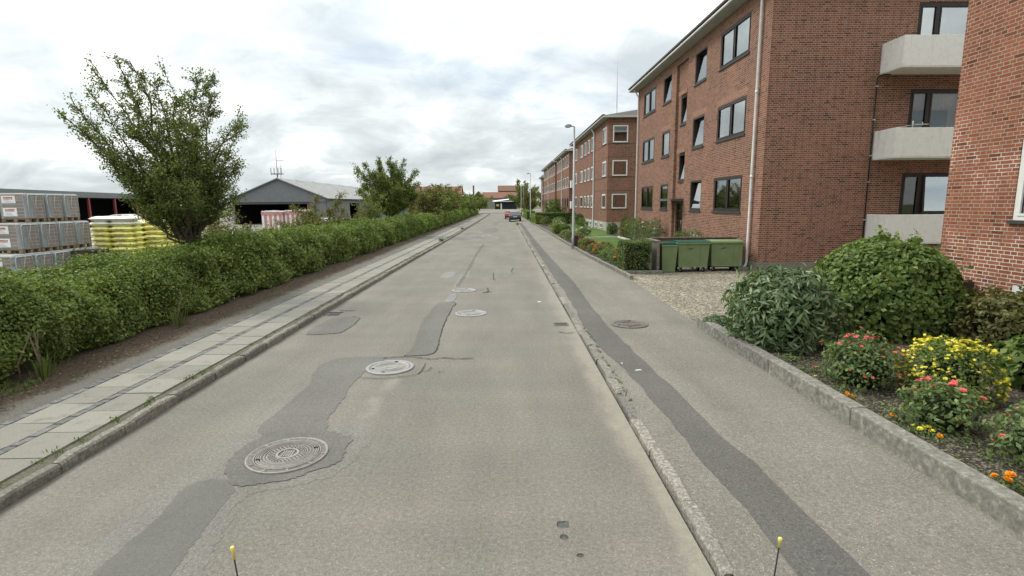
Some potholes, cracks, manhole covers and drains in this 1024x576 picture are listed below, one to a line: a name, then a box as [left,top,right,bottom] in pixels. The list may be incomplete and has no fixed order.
manhole cover [612,320,648,329]
manhole cover [245,437,328,474]
manhole cover [366,360,414,375]
